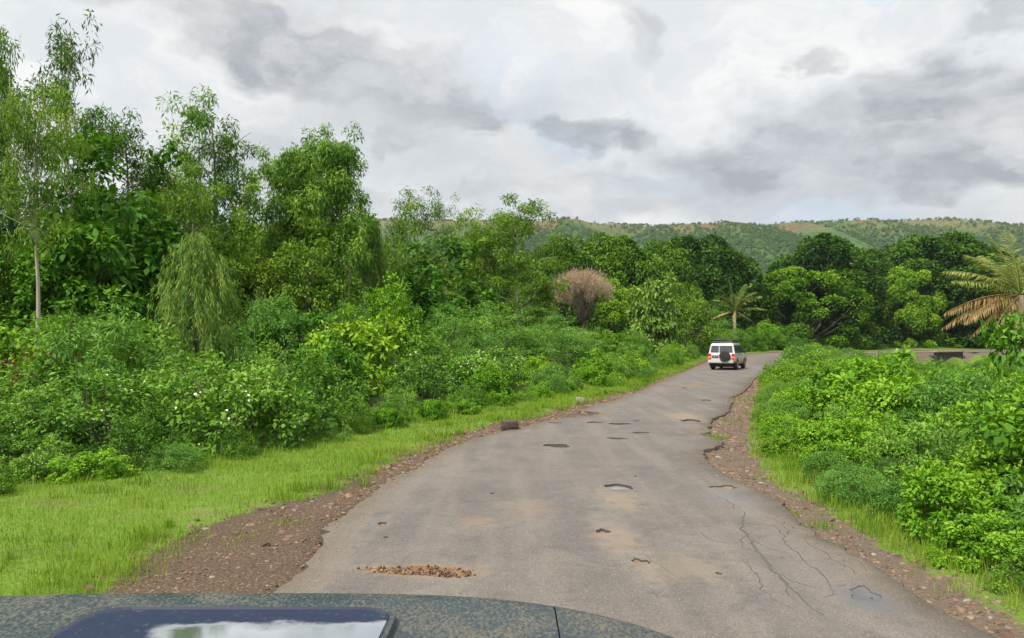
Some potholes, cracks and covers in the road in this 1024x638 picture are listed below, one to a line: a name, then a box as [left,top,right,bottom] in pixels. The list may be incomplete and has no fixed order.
crack [701,496,866,615]
pothole [850,585,882,602]
